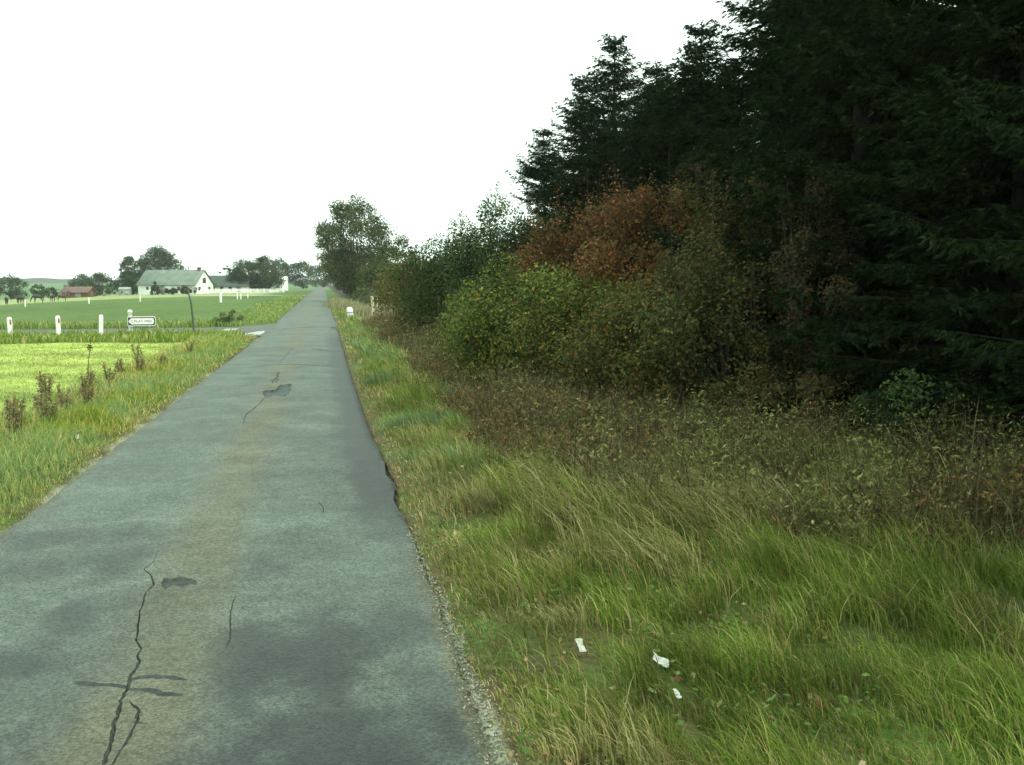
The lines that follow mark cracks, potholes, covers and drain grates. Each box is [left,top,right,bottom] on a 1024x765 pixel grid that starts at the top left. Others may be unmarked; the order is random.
crack [225,594,237,650]
crack [75,549,188,765]
crack [243,349,330,422]
pothole [161,577,197,590]
pothole [262,383,292,397]
